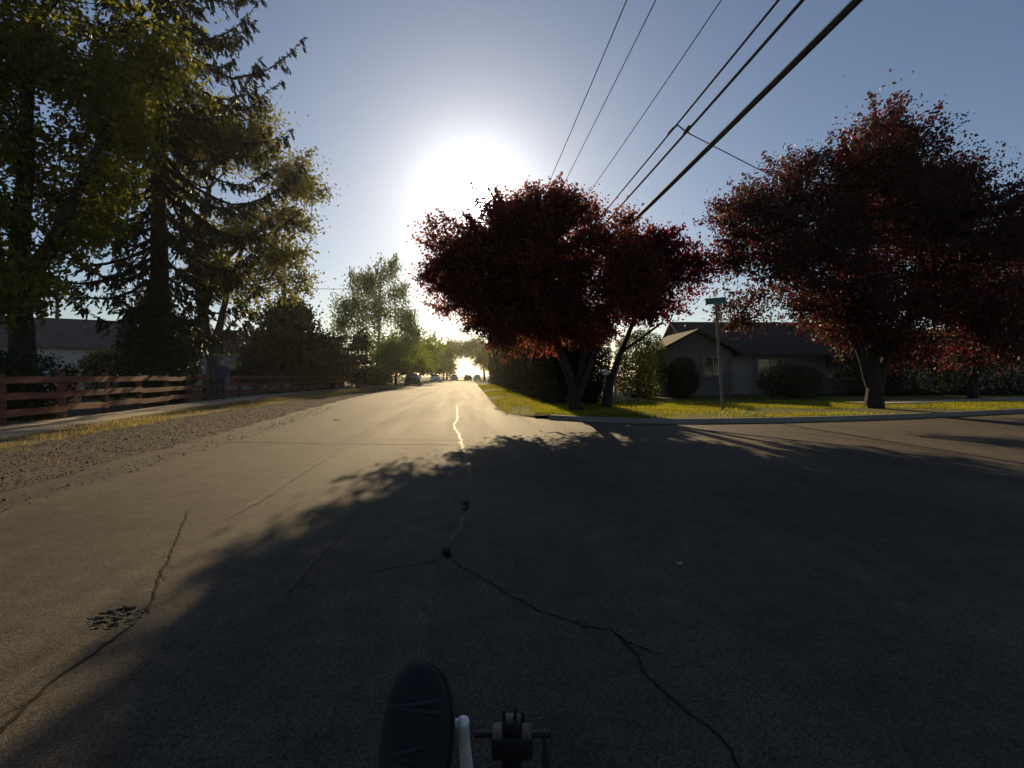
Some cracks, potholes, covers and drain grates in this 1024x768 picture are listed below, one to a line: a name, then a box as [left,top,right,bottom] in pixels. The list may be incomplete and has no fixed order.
crack [0,507,191,732]
crack [355,557,741,768]
